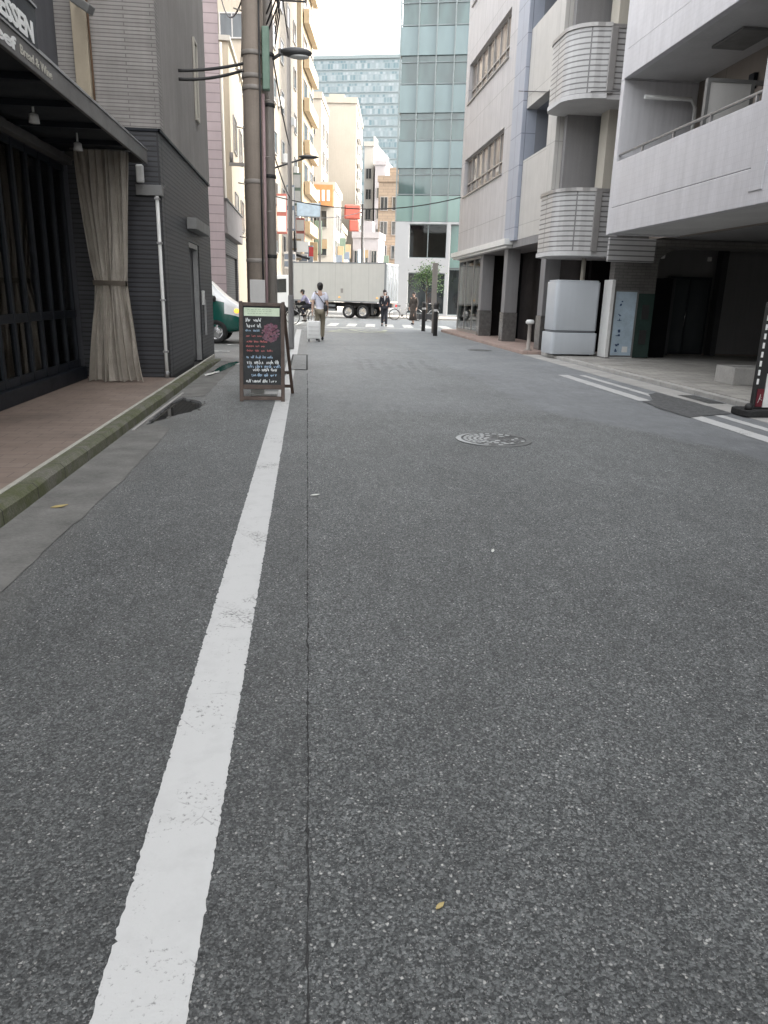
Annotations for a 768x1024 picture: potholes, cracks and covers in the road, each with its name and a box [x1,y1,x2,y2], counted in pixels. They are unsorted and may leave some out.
manhole cover [456,432,532,447]
pothole [132,393,206,431]
